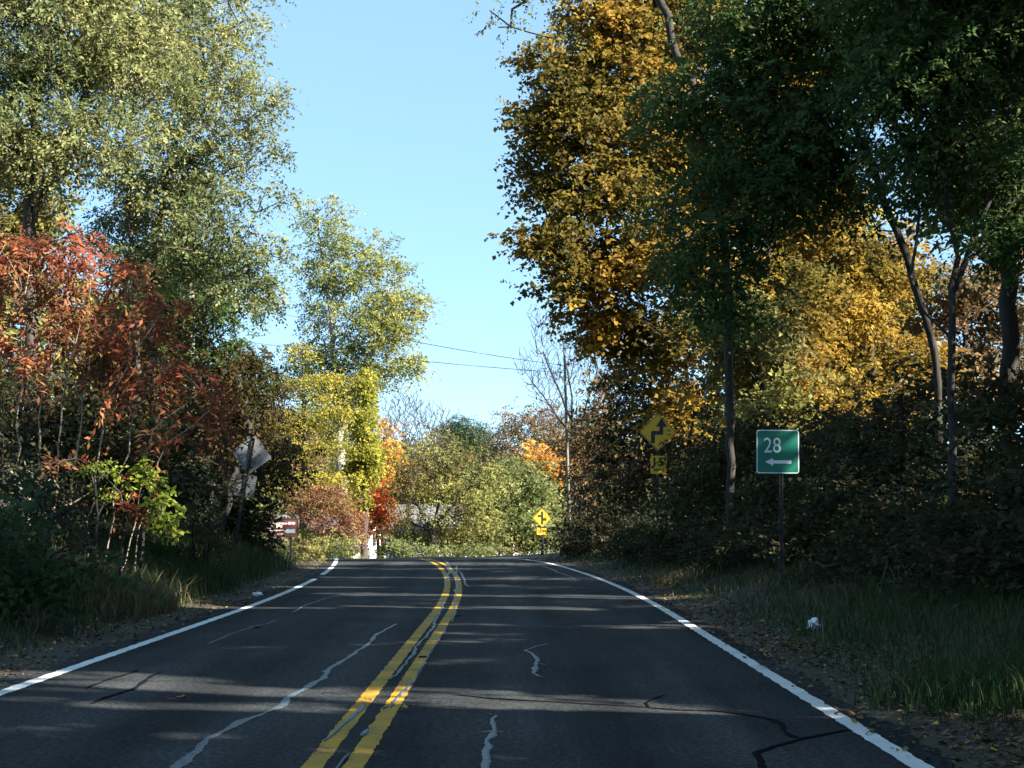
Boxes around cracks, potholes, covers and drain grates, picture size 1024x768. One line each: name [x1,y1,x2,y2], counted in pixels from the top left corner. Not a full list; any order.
crack [207,620,276,644]
